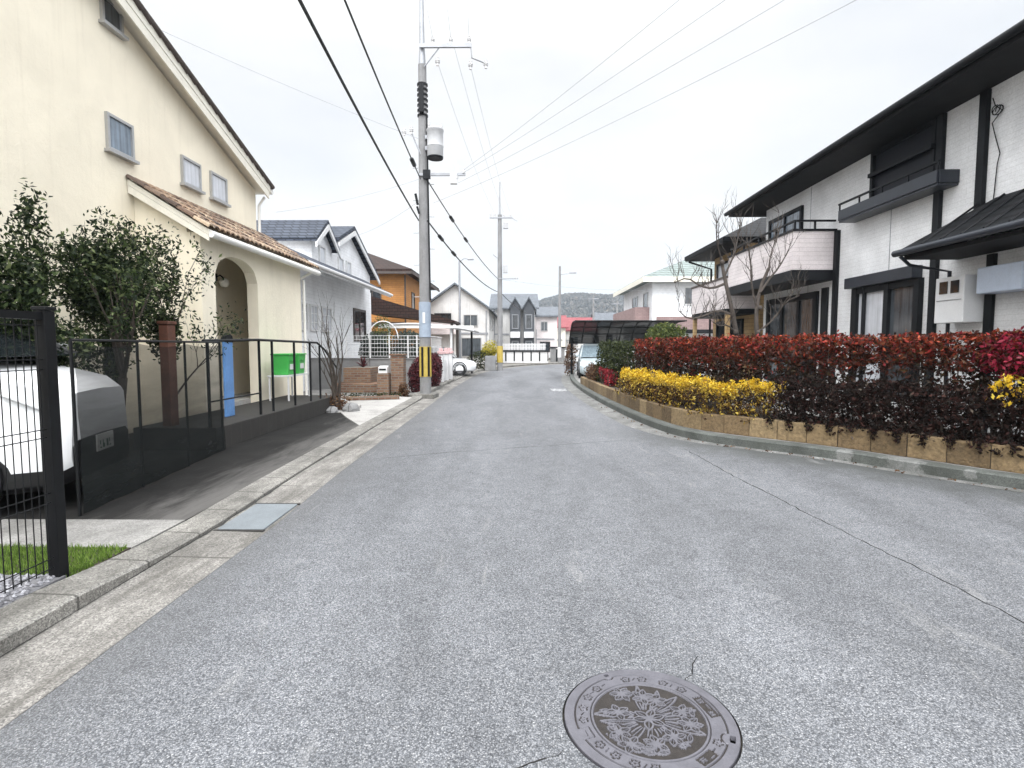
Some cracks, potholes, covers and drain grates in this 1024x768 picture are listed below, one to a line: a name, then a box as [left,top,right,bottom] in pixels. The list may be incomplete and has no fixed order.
crack [685,449,1024,623]
manhole cover [564,669,741,768]
crack [517,752,561,768]
